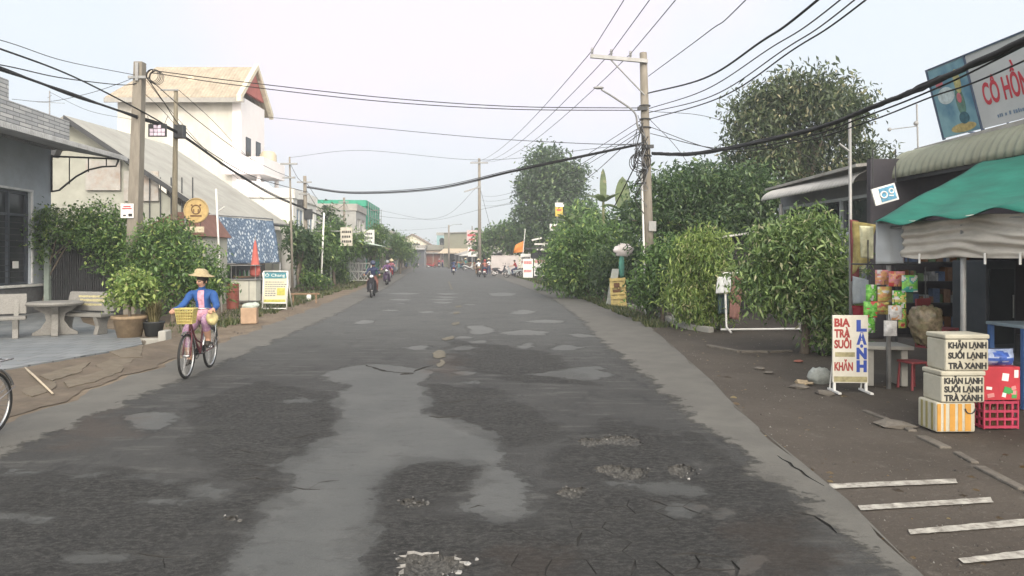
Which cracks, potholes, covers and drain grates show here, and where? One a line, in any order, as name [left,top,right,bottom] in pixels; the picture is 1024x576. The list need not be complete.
pothole [394,551,479,576]
pothole [397,496,430,508]
pothole [555,485,589,499]
crack [511,496,740,576]
crack [366,365,433,375]
pothole [595,463,652,481]
pothole [574,434,644,448]
pothole [663,463,702,480]
crack [789,511,837,533]
